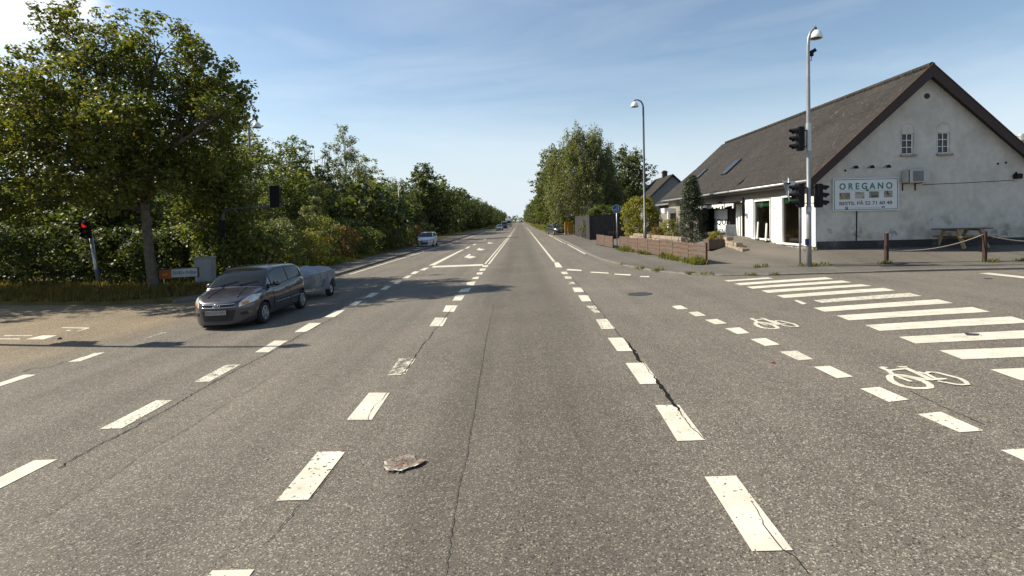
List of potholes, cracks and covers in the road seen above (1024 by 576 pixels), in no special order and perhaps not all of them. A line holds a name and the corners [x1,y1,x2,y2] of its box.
crack [32,316,337,524]
crack [751,501,808,573]
crack [445,306,494,573]
